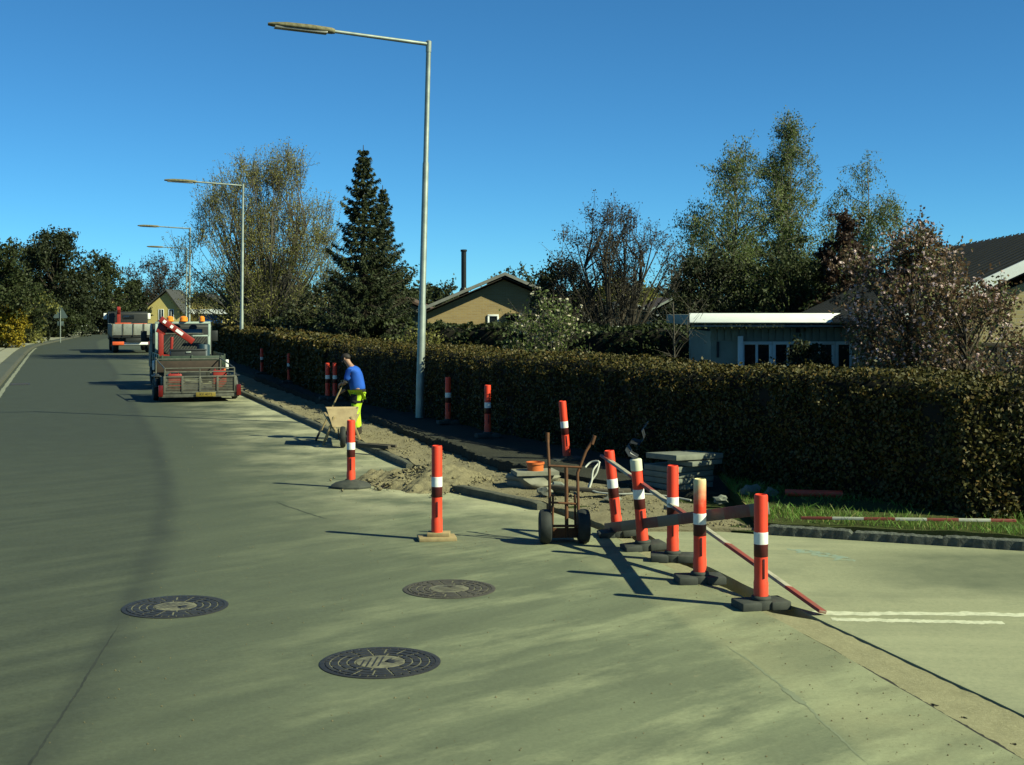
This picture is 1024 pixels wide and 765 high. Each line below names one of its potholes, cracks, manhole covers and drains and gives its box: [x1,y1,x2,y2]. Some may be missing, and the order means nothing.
manhole cover [319,647,441,679]
manhole cover [403,579,496,599]
manhole cover [121,595,229,619]
